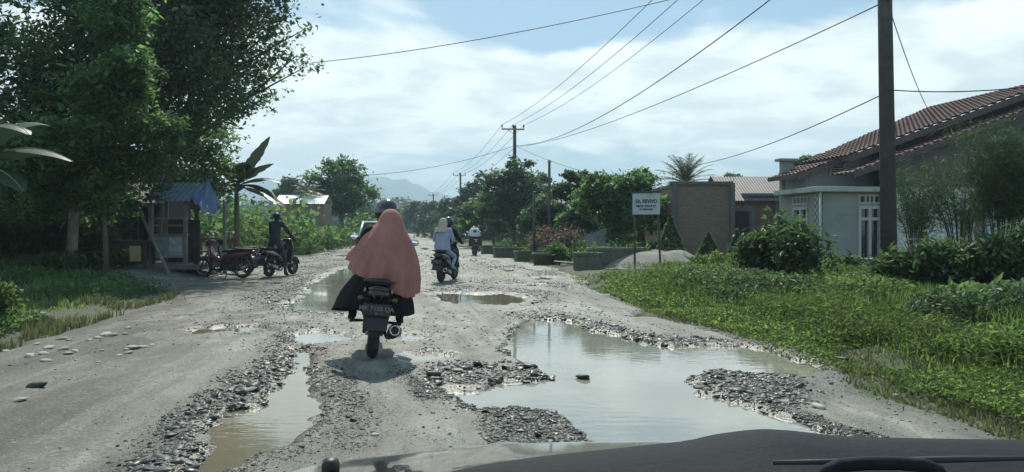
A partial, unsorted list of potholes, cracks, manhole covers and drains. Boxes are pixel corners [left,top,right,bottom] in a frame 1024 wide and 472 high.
pothole [420,284,565,308]
pothole [100,326,397,472]
pothole [387,309,890,445]
pothole [169,320,327,334]
